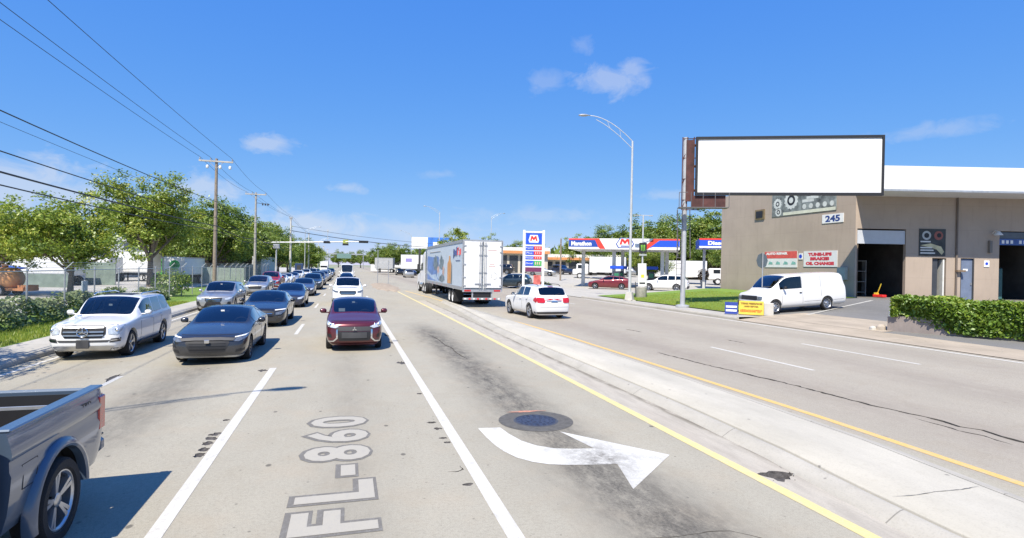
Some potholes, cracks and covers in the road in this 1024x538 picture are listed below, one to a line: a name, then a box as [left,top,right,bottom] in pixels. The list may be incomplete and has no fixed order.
crack [661,353,1024,445]
pothole [758,471,794,482]
manhole cover [499,410,573,431]
